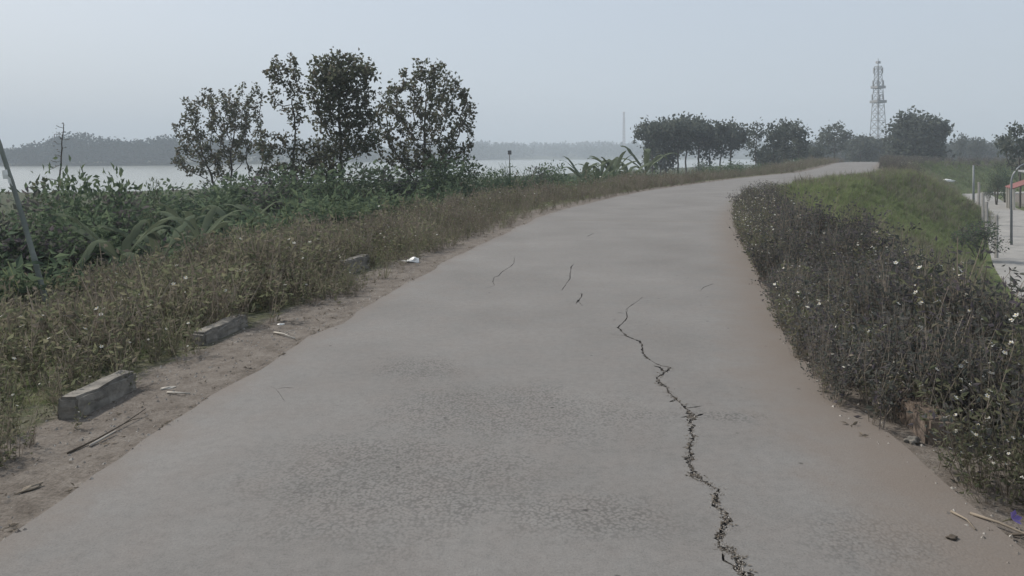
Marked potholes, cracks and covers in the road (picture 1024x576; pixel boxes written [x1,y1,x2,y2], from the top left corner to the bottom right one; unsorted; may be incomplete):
crack [617,304,754,576]
